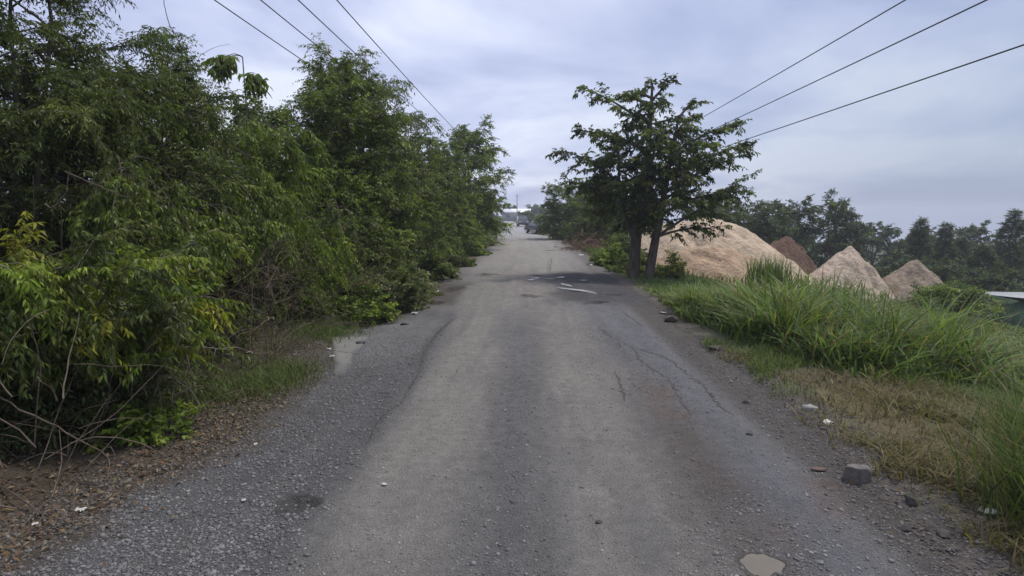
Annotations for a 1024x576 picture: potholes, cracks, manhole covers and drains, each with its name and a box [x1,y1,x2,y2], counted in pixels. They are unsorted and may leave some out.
crack [369,319,453,439]
crack [600,329,733,415]
